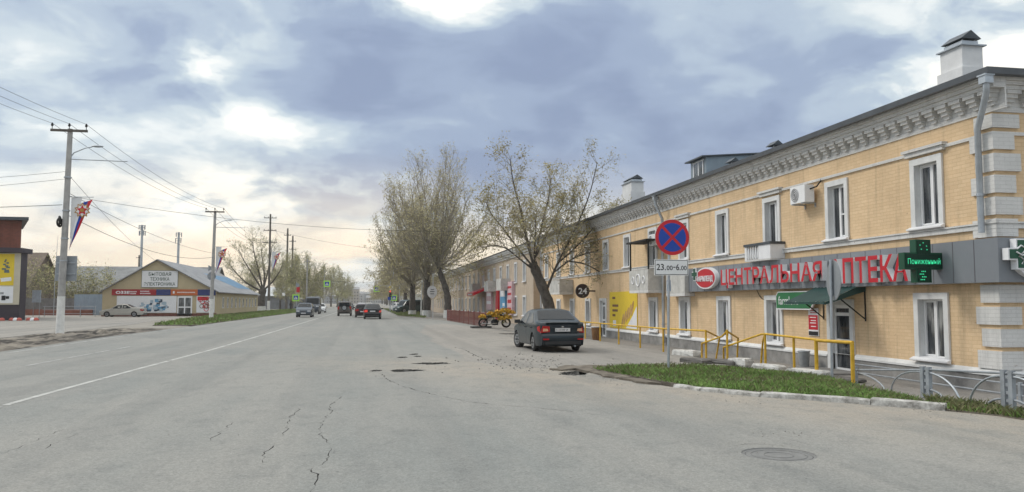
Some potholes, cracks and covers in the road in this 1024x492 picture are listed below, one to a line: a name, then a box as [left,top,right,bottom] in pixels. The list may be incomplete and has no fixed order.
crack [309,397,341,492]
manhole cover [741,448,817,461]
